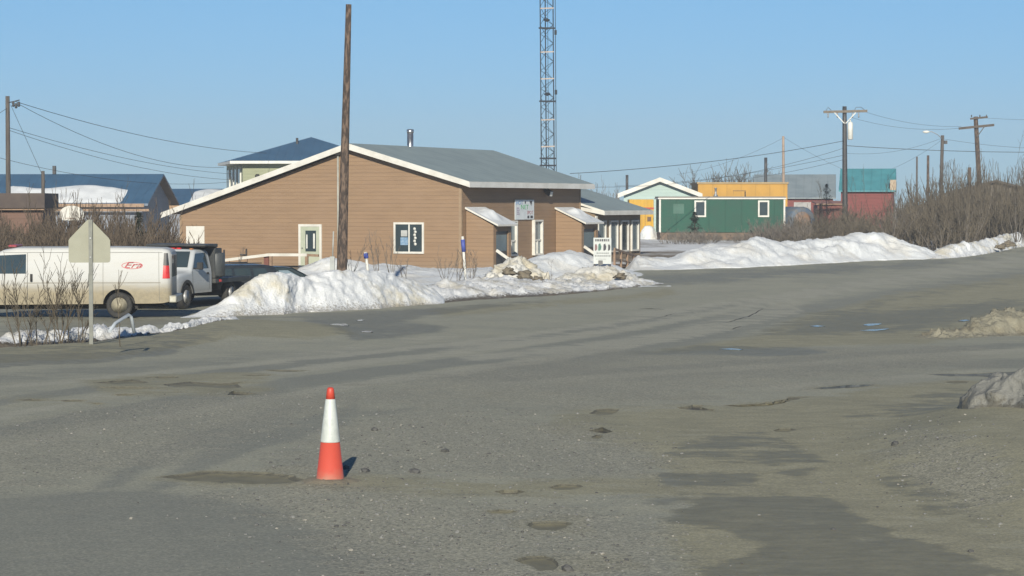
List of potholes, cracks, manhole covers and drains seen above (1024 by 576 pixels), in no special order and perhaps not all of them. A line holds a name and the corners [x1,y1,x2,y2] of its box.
pothole [527,521,572,530]
pothole [515,556,559,571]
pothole [162,471,304,484]
